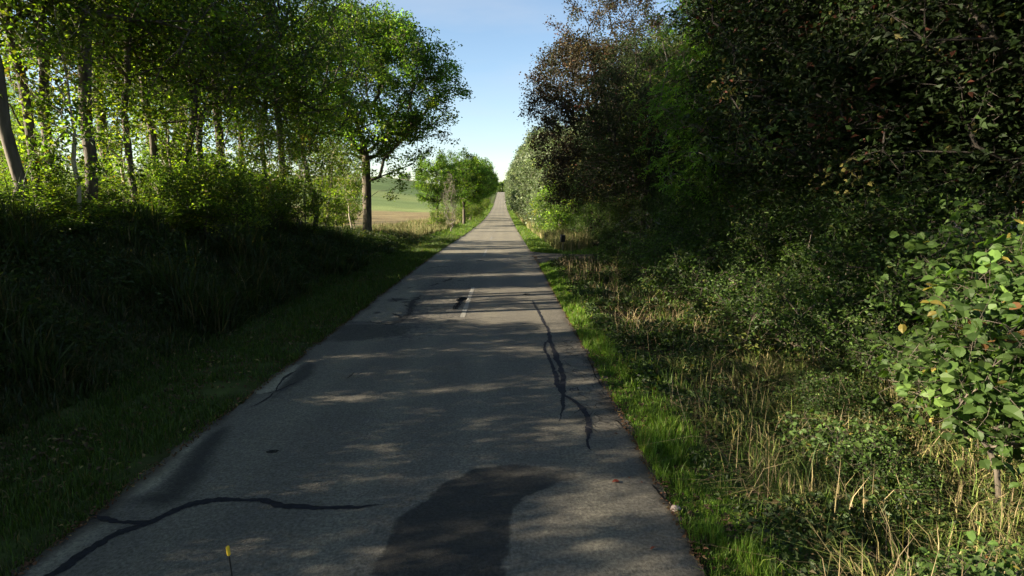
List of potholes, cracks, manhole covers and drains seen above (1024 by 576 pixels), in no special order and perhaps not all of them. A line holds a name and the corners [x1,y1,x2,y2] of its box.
crack [355,266,461,325]
crack [251,371,296,407]
